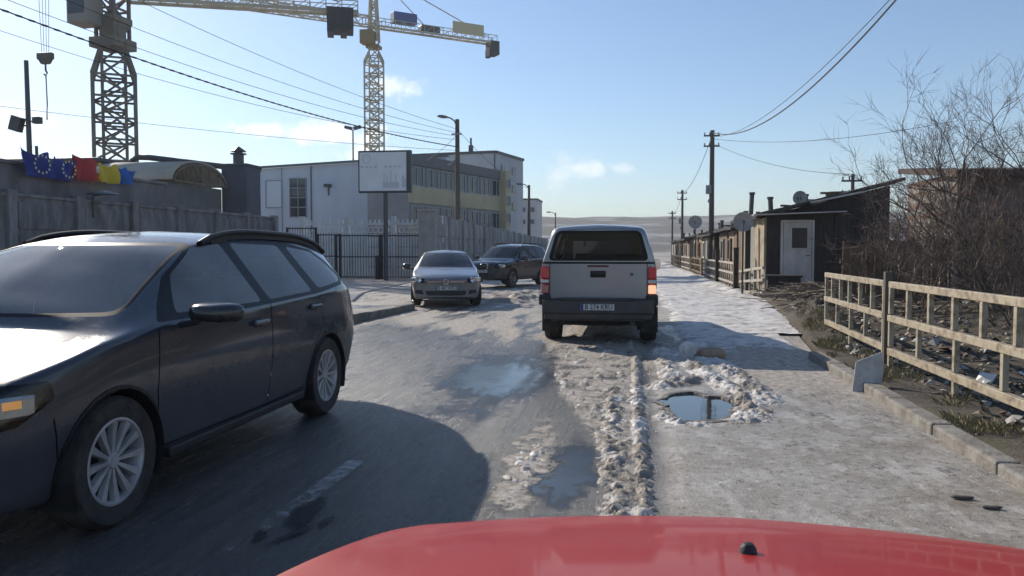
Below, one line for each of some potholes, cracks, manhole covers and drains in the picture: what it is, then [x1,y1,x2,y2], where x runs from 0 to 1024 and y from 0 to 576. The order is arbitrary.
pothole [652,390,742,424]
